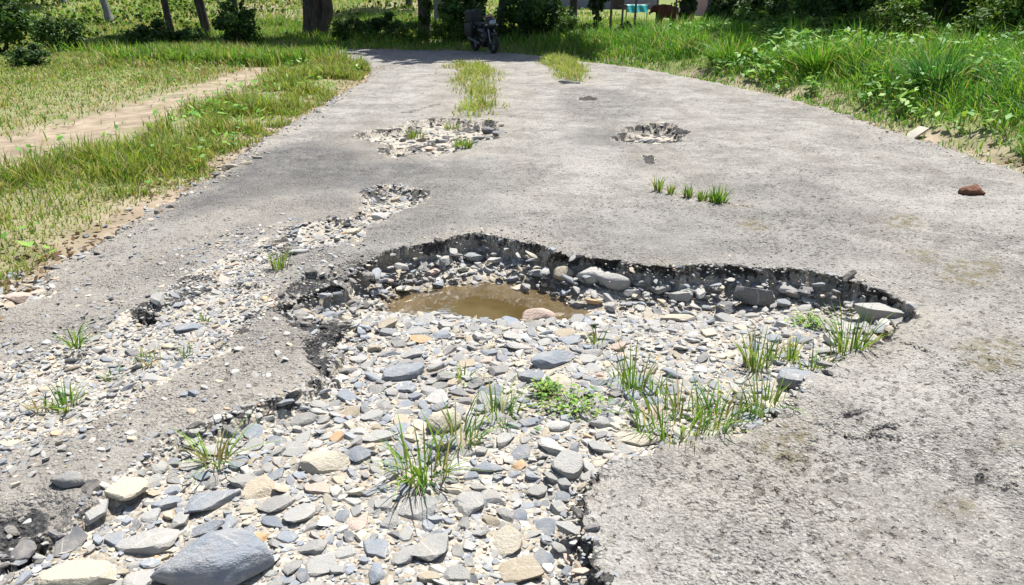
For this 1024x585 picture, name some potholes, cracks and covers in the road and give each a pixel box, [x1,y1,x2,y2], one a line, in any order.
crack [810,408,902,443]
pothole [349,184,430,225]
pothole [279,218,366,250]
pothole [354,117,507,158]
pothole [610,122,691,144]
pothole [0,232,919,585]
